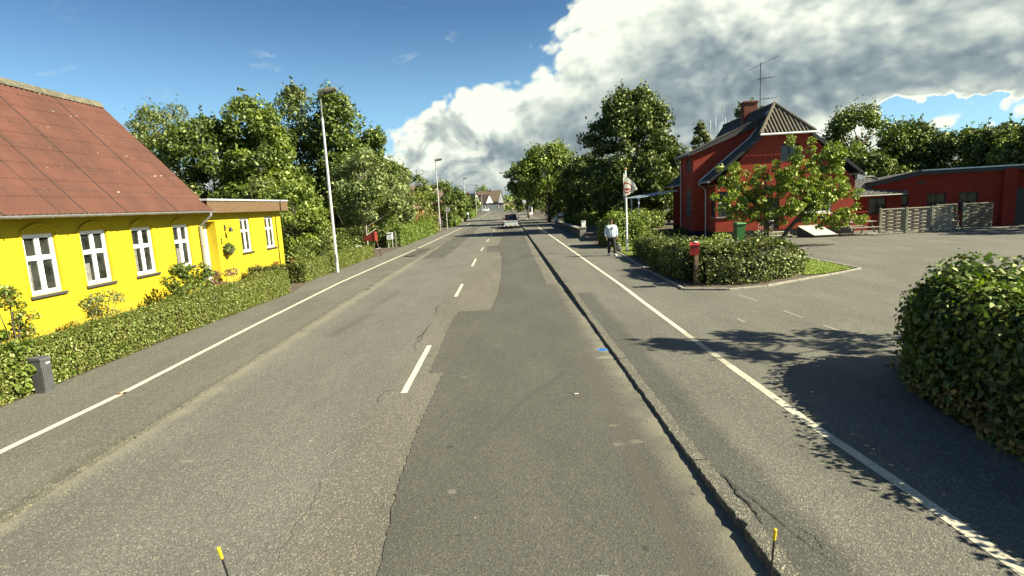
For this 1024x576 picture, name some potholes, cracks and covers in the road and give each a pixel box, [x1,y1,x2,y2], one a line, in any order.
crack [413,287,448,359]
crack [265,455,337,575]
crack [724,474,844,569]
